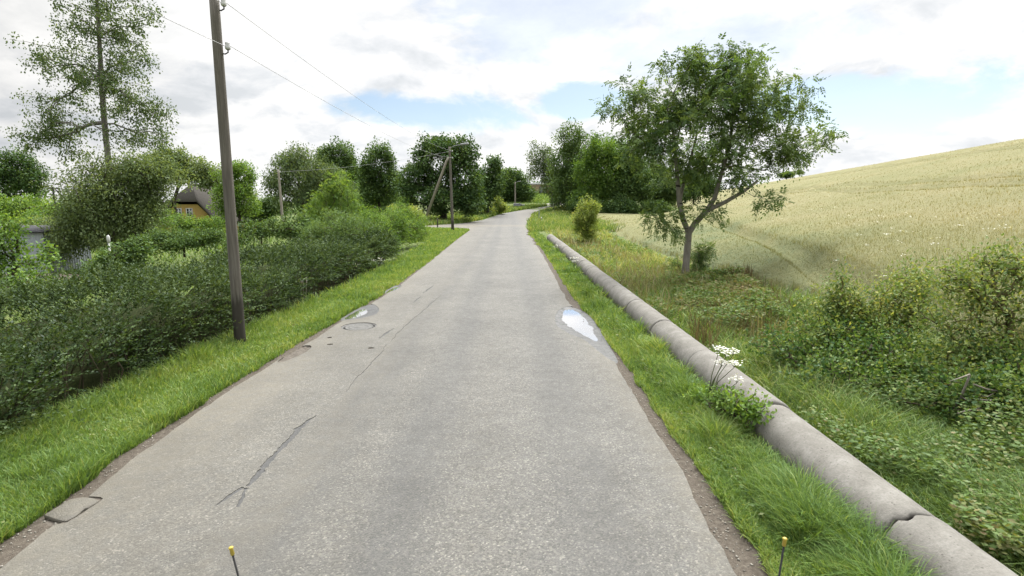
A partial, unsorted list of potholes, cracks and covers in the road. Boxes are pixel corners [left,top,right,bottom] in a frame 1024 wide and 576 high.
crack [216,416,316,507]
pothole [341,304,379,321]
pothole [555,306,618,363]
